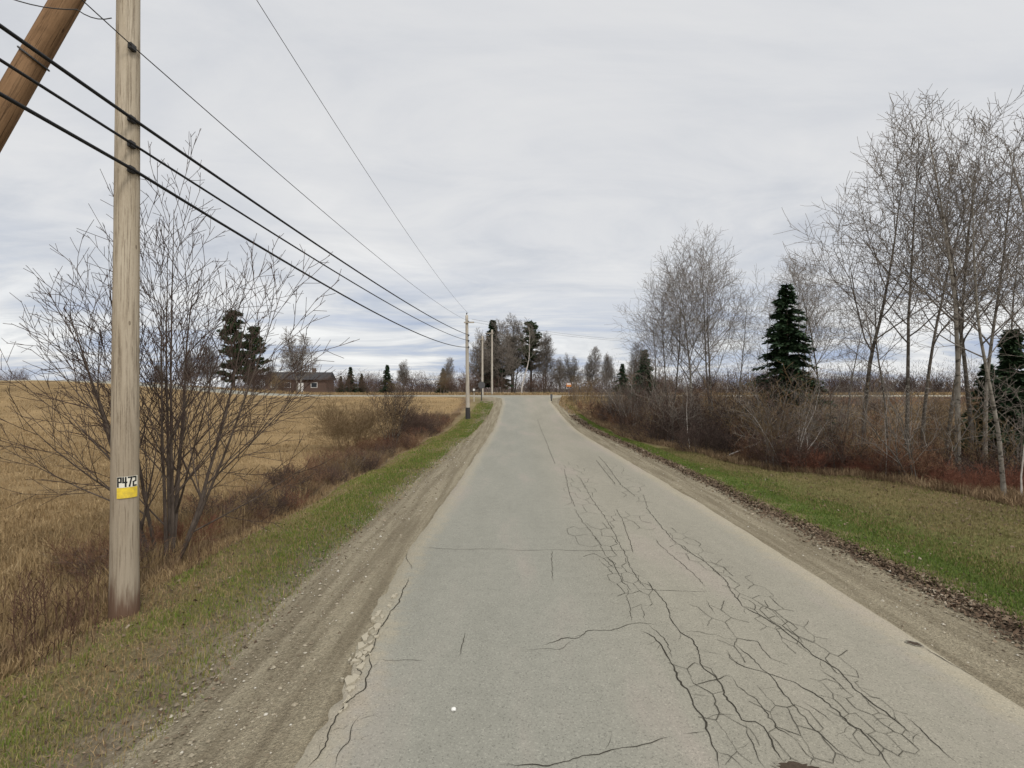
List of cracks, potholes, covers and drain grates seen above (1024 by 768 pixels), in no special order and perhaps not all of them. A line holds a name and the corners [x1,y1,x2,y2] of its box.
crack [428,460,956,768]
pothole [771,759,824,768]
crack [308,557,431,767]
